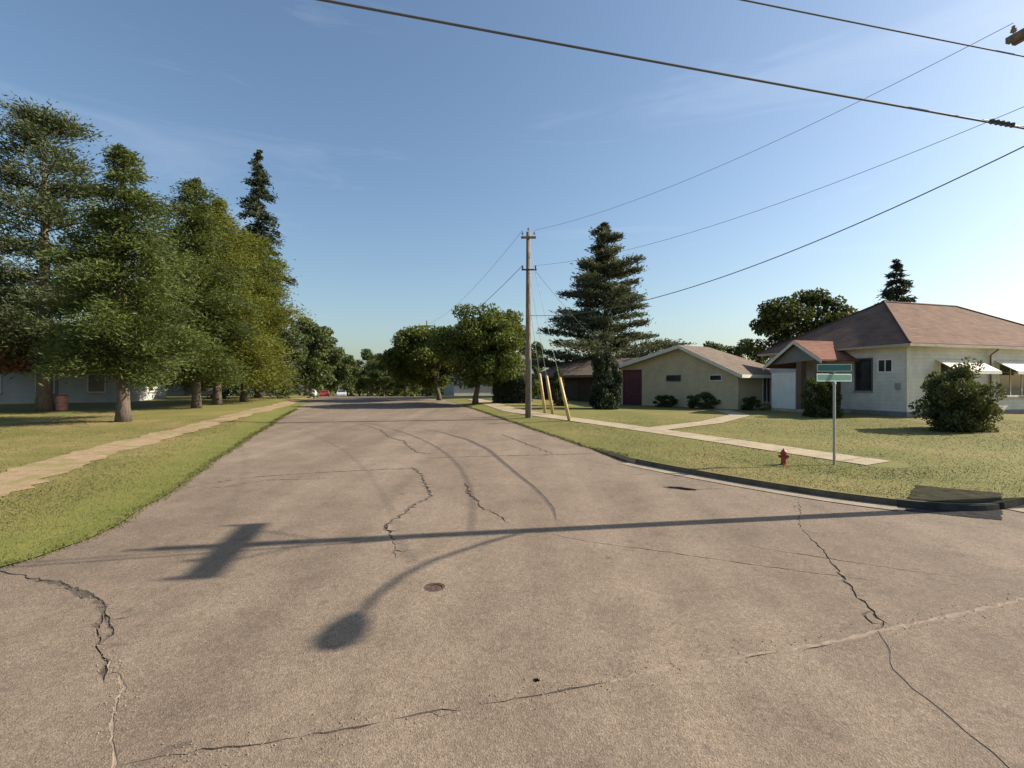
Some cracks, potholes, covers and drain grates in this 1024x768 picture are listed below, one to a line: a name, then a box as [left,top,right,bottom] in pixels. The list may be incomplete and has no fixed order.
crack [177,419,594,558]
crack [0,504,1024,768]
utility cover [424,583,445,592]
